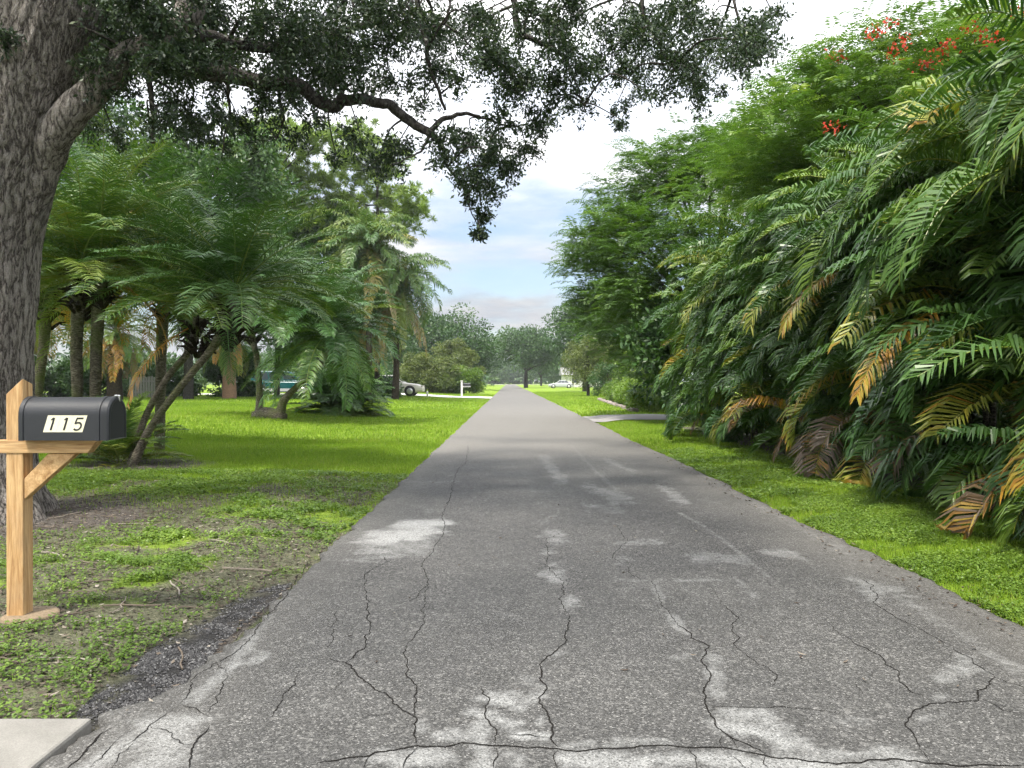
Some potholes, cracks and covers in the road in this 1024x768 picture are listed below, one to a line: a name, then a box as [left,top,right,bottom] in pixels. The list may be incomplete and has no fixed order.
crack [317,449,1021,768]
crack [68,562,308,768]
